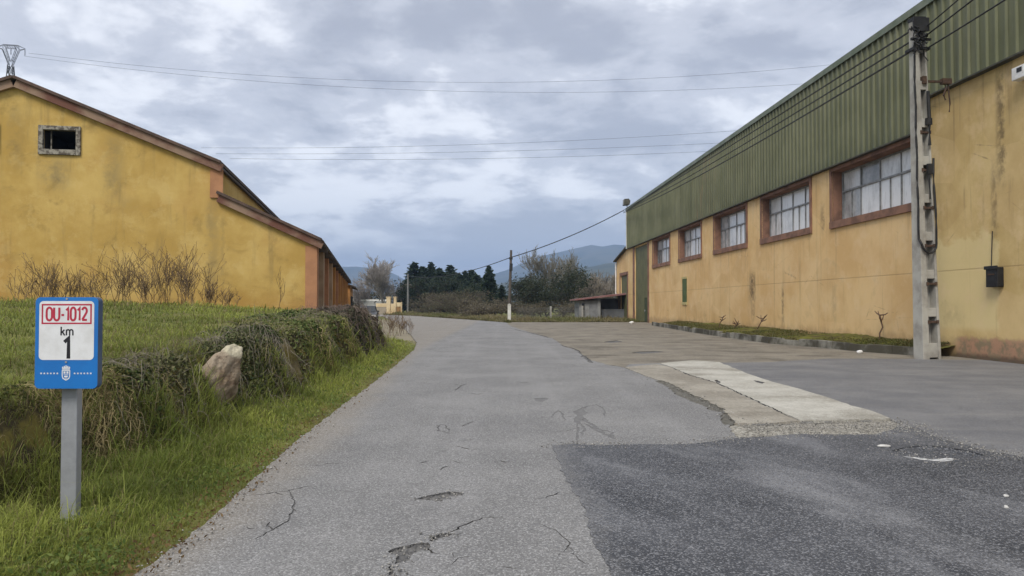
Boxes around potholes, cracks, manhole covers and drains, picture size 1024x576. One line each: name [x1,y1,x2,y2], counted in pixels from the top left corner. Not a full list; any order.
crack [246,486,316,538]
crack [543,525,586,564]
crack [551,405,615,442]
pothole [418,492,463,501]
pothole [388,543,430,564]
crack [388,517,501,569]
